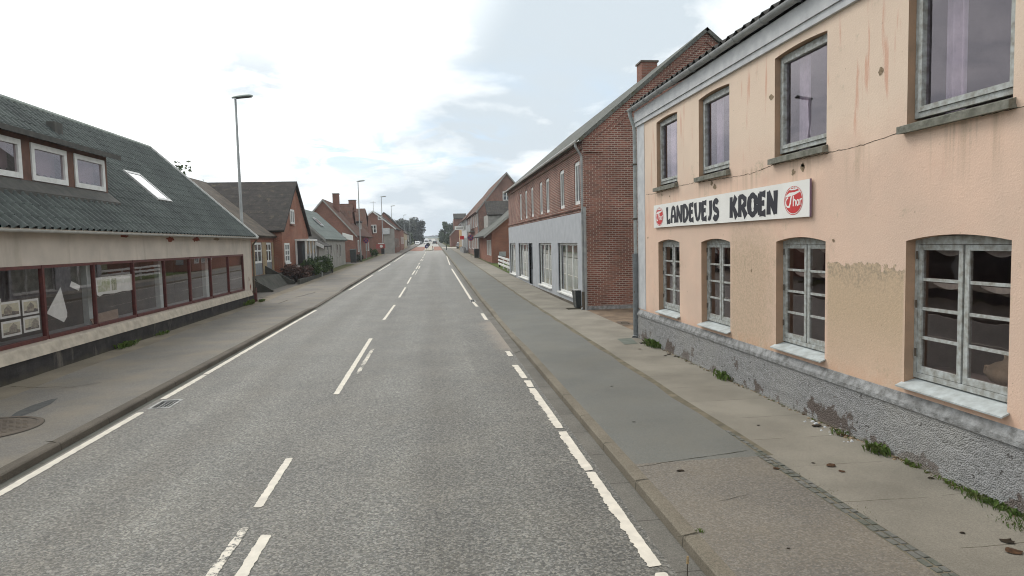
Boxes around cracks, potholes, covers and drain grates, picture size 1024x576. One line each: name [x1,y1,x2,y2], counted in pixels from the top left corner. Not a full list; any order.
manhole cover [0,416,45,437]
drain grate [148,399,183,409]
